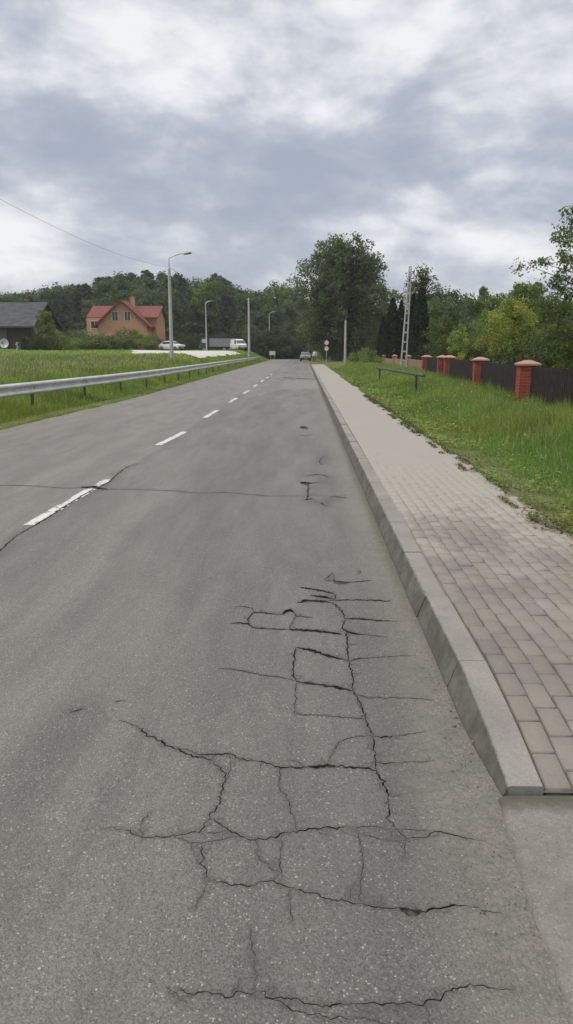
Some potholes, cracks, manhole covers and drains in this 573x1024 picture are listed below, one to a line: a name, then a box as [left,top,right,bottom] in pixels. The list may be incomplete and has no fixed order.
crack [103,573,500,924]
crack [168,929,507,1024]
crack [305,457,345,506]
crack [0,485,263,496]
pothole [399,907,422,916]
